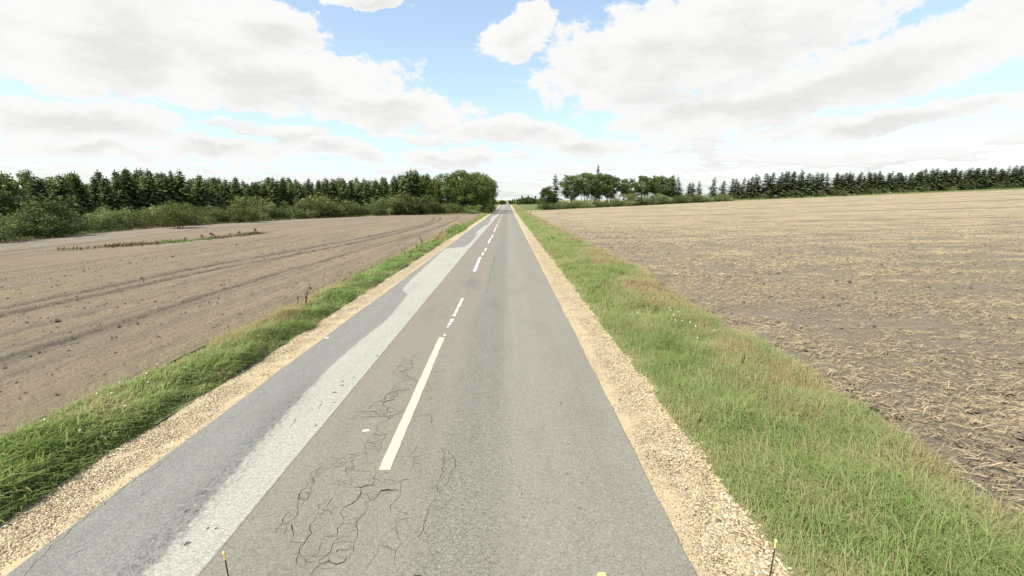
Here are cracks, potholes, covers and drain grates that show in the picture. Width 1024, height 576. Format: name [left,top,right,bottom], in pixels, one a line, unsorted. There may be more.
crack [413,415,456,545]
crack [276,354,423,575]
